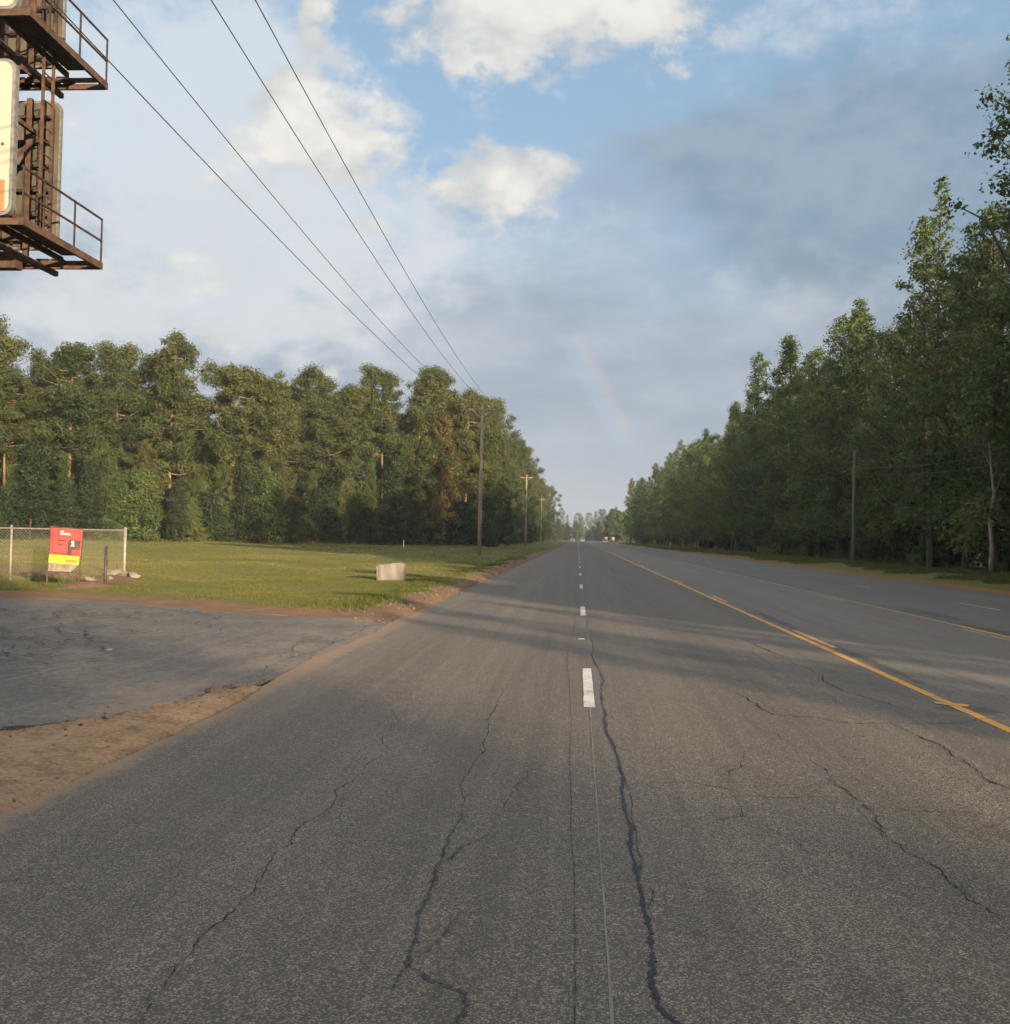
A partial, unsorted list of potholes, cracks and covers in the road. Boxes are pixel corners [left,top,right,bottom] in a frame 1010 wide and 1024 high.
crack [750,641,900,708]
crack [626,685,1009,916]
crack [143,701,406,1023]
crack [354,690,586,1024]
